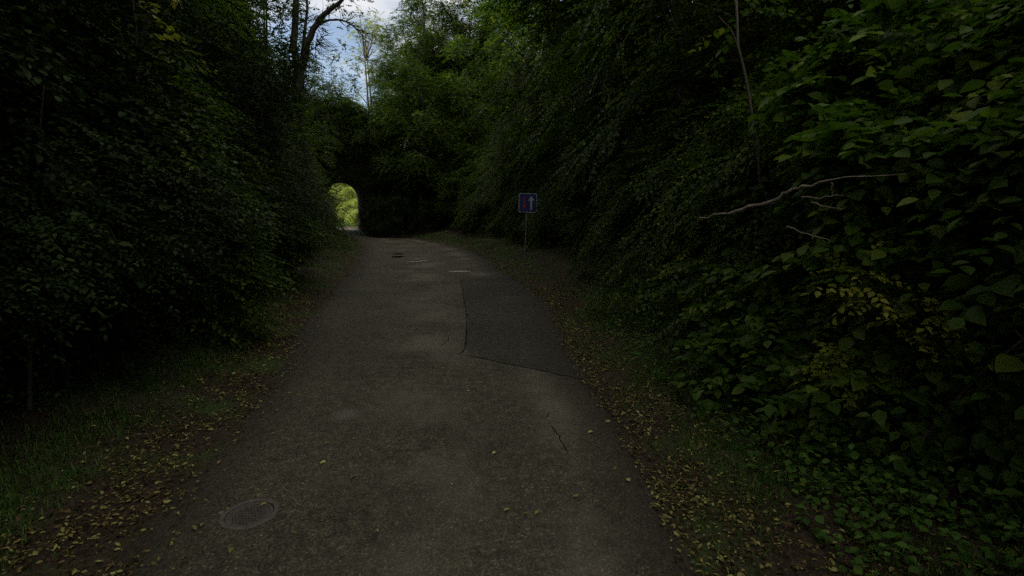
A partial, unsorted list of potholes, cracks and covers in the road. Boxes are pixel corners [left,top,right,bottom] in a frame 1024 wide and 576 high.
manhole cover [218,498,279,531]
crack [442,279,585,381]
